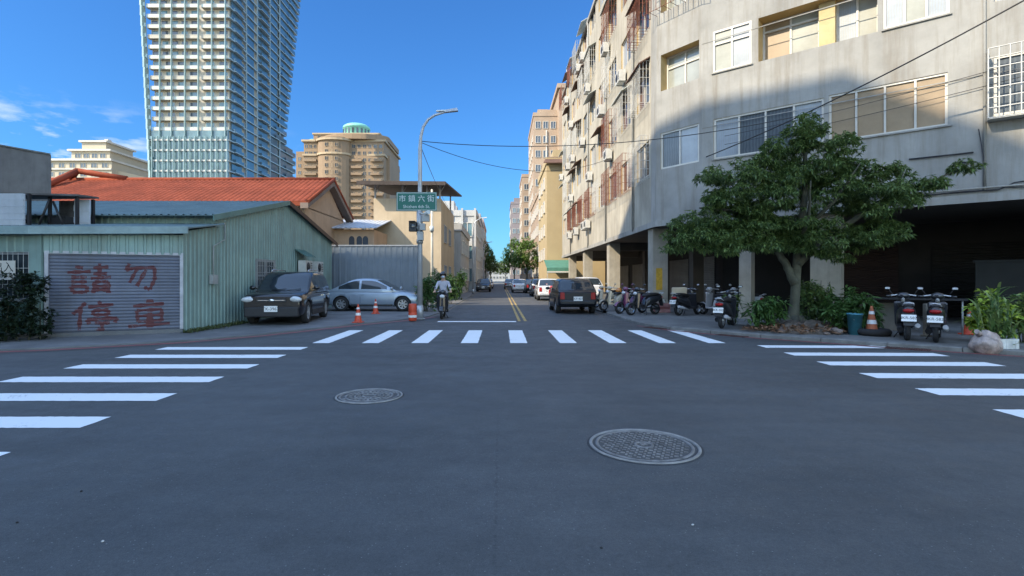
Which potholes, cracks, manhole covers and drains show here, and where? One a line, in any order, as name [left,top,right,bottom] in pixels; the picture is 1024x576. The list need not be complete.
manhole cover [333,388,404,404]
manhole cover [587,429,705,466]
